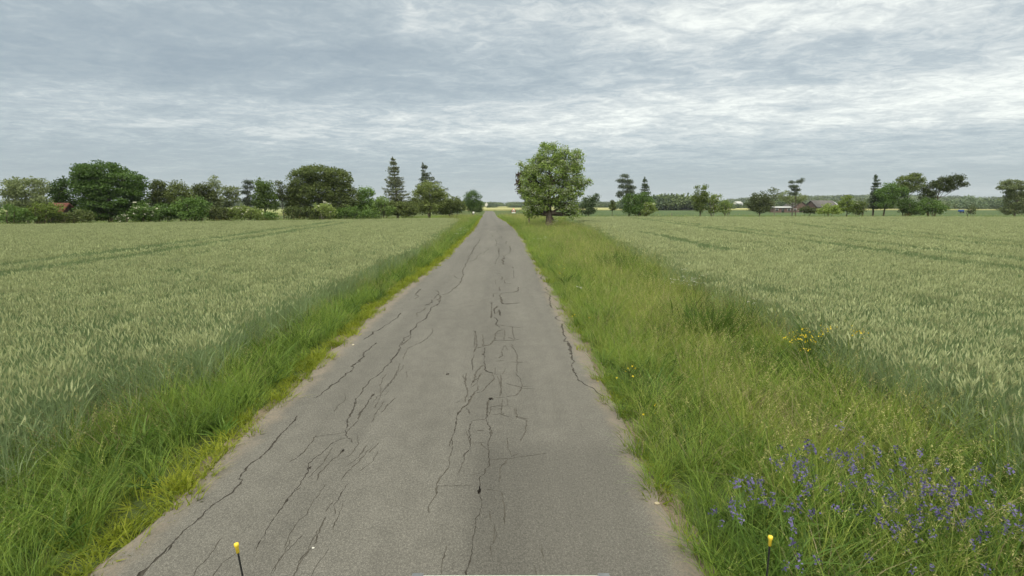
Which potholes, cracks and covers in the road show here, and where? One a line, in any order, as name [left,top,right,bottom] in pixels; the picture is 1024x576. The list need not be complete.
crack [428,237,546,575]
crack [535,273,602,396]
crack [137,239,486,576]
